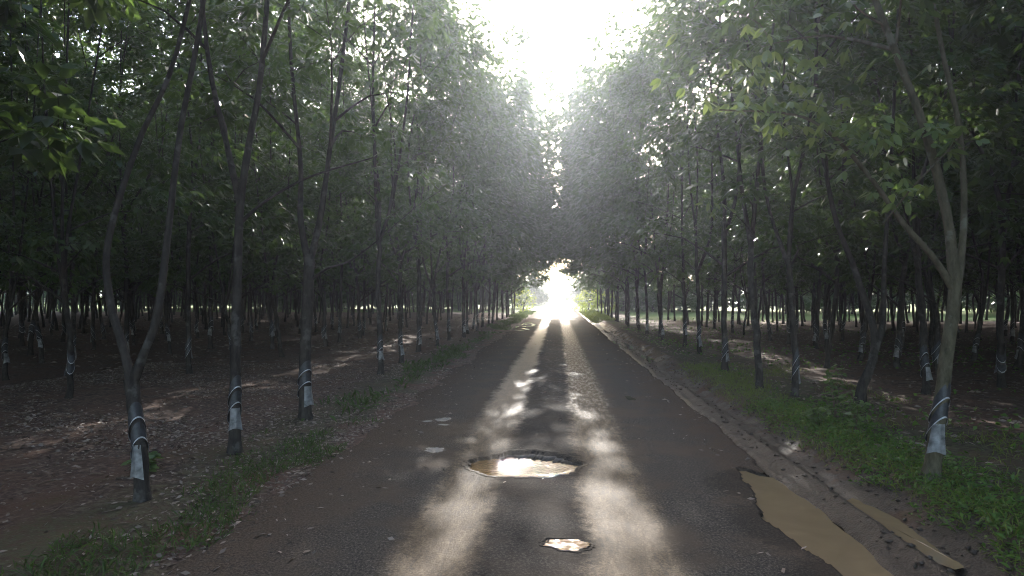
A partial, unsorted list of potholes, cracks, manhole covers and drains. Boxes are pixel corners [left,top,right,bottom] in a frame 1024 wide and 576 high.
pothole [461,448,589,479]
pothole [538,536,595,554]
